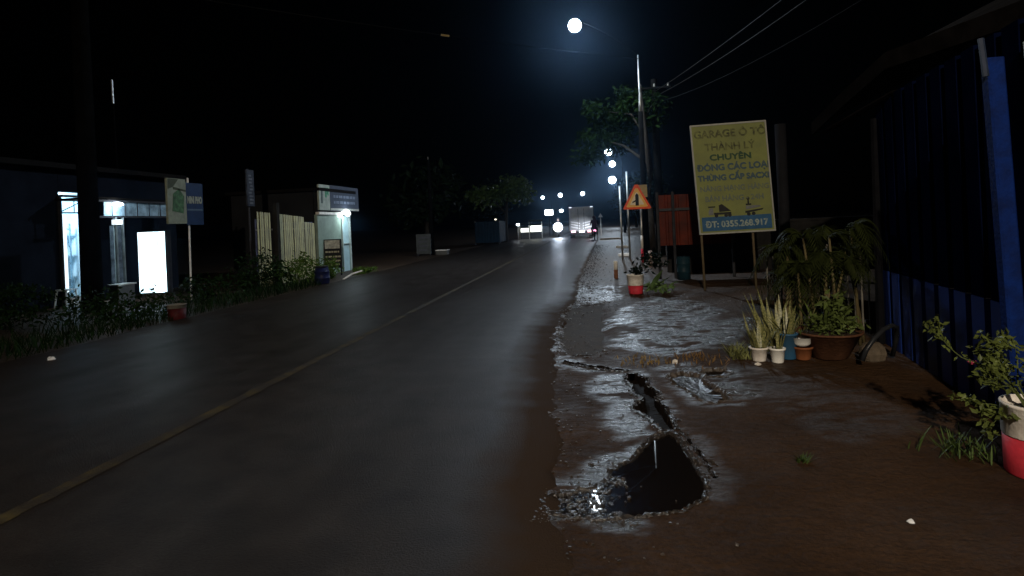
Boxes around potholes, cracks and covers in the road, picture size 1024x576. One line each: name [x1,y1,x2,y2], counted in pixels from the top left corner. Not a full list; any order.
crack [558,360,720,478]
pothole [698,367,734,377]
pothole [540,429,712,521]
pothole [663,370,733,405]
